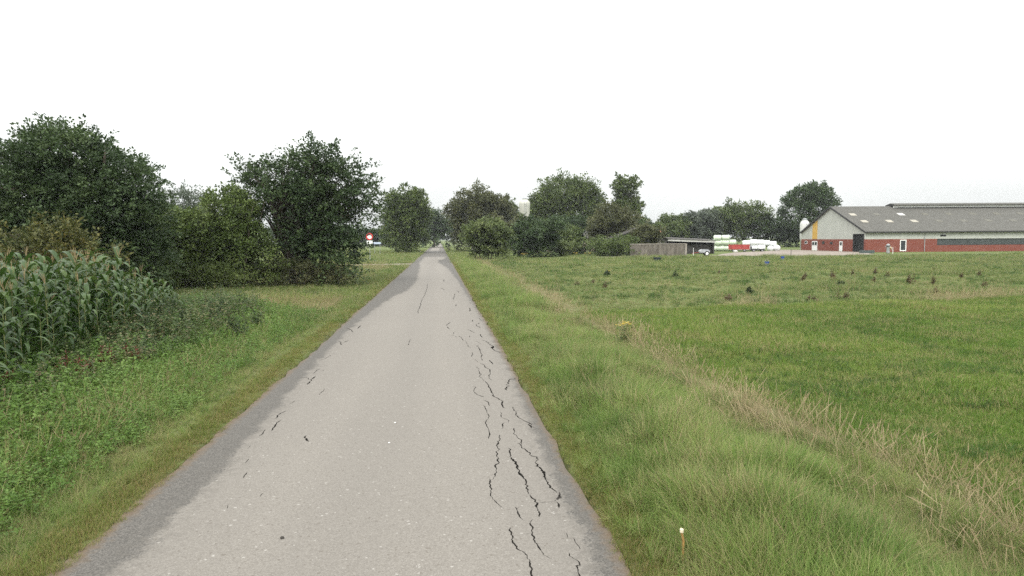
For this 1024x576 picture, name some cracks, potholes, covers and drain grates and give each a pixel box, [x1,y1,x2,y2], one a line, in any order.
crack [447,291,562,576]
